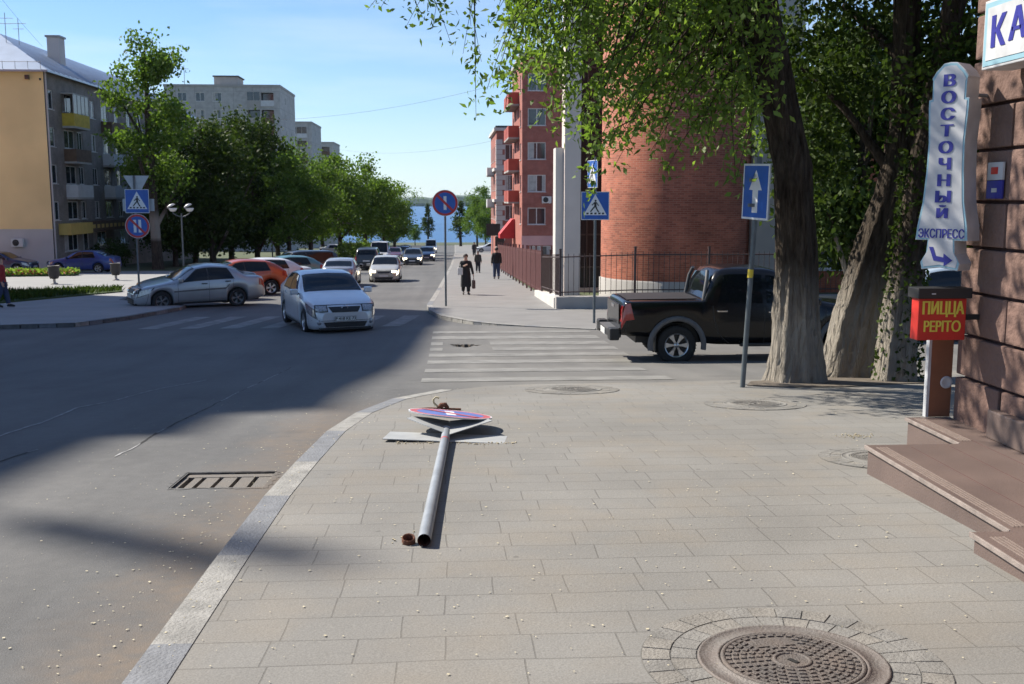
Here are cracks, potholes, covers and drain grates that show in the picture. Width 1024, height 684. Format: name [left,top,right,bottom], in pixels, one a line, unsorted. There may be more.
manhole cover [525,385,620,395]
crack [0,380,204,461]
manhole cover [818,447,868,468]
manhole cover [704,398,807,410]
drain grate [166,470,281,490]
crack [116,367,291,456]
manhole cover [640,608,956,684]
